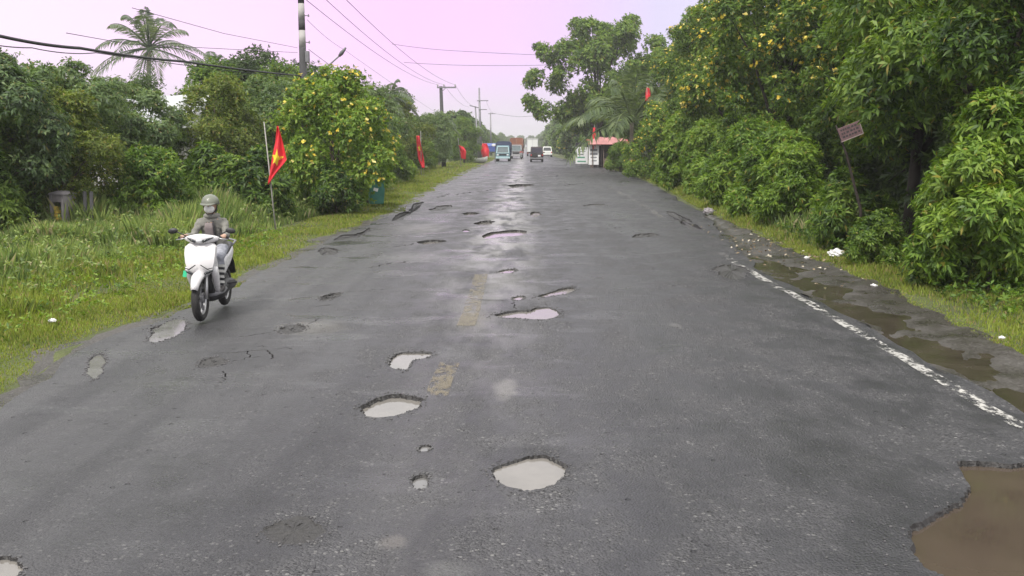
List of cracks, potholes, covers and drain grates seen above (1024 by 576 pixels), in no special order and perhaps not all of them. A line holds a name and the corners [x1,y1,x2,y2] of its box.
pothole [353,391,428,420]
pothole [0,554,33,576]
pothole [142,316,193,347]
pothole [482,230,527,239]
pothole [381,349,437,372]
pothole [851,428,1024,576]
pothole [480,450,576,496]
pothole [486,302,565,321]
crack [221,289,383,381]
pothole [82,349,110,383]
pothole [408,471,432,490]
pothole [316,292,344,301]
